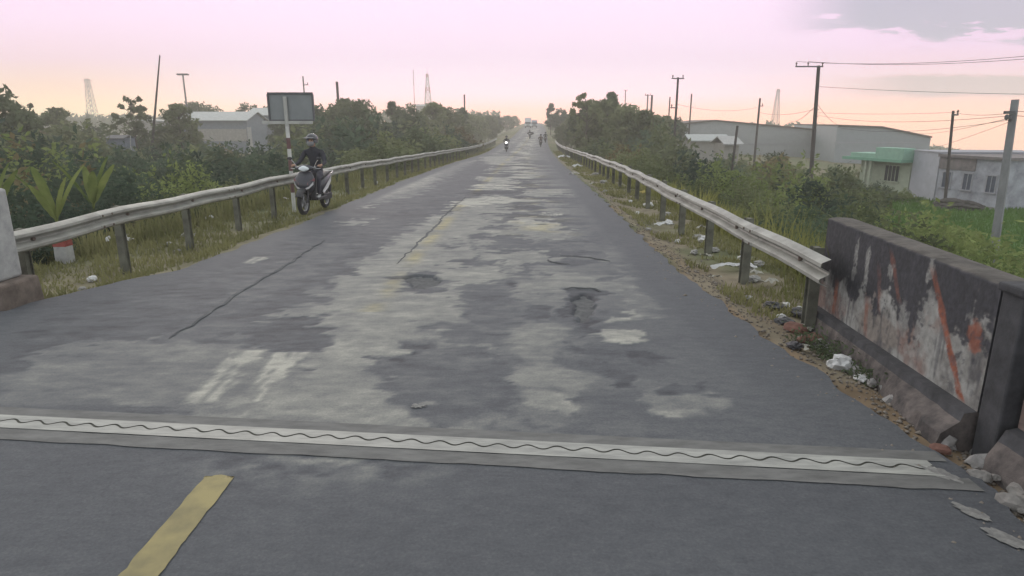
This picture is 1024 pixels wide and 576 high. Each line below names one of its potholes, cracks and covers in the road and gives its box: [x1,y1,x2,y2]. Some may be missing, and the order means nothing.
crack [396,193,477,264]
pothole [406,277,440,289]
pothole [572,296,595,323]
crack [169,240,325,338]
